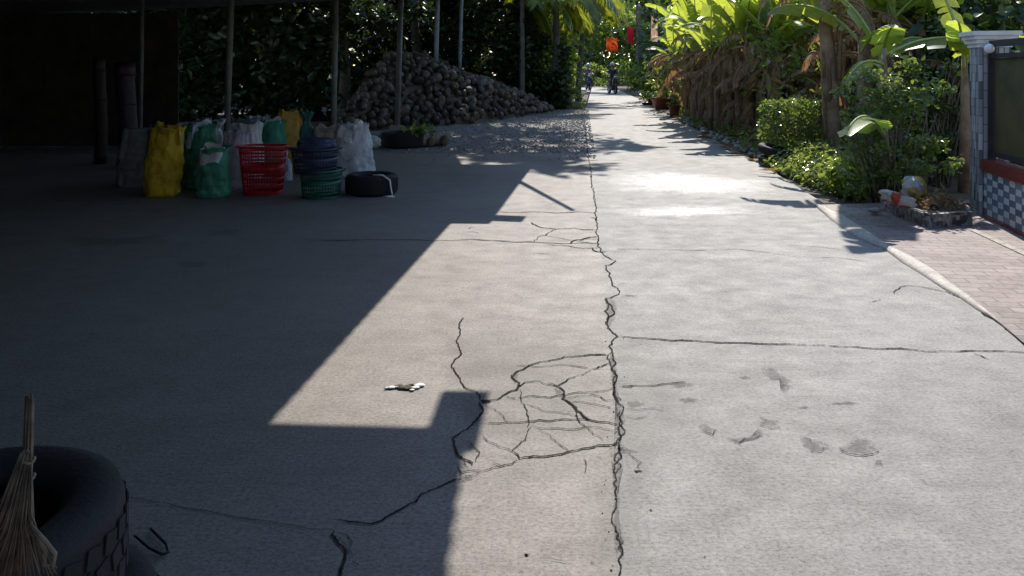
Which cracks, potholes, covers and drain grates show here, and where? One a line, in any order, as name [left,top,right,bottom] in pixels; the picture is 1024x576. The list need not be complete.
crack [331,111,686,576]
